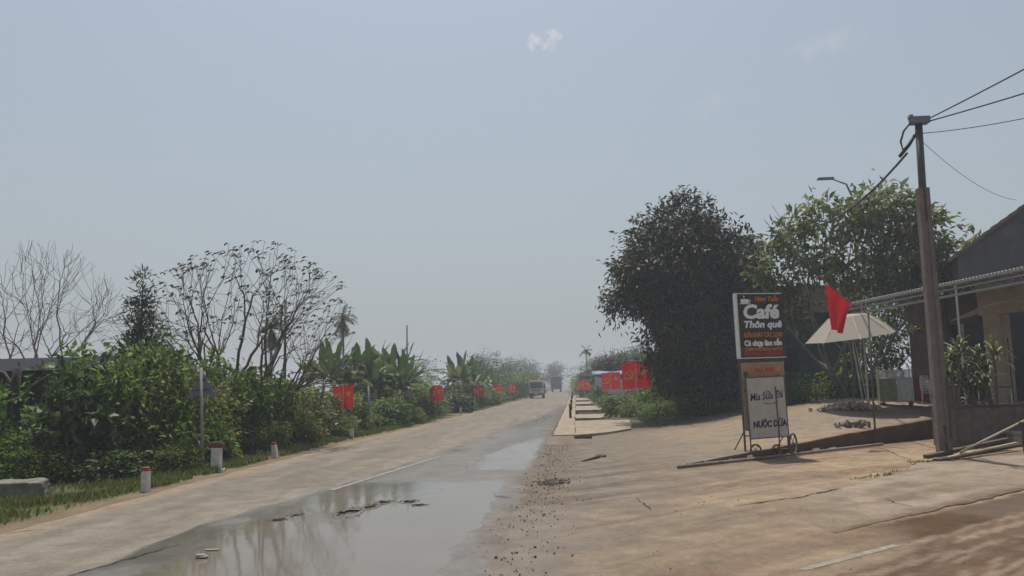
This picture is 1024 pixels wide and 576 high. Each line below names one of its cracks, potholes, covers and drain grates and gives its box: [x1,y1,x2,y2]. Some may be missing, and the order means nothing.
pothole [328,506,366,519]
